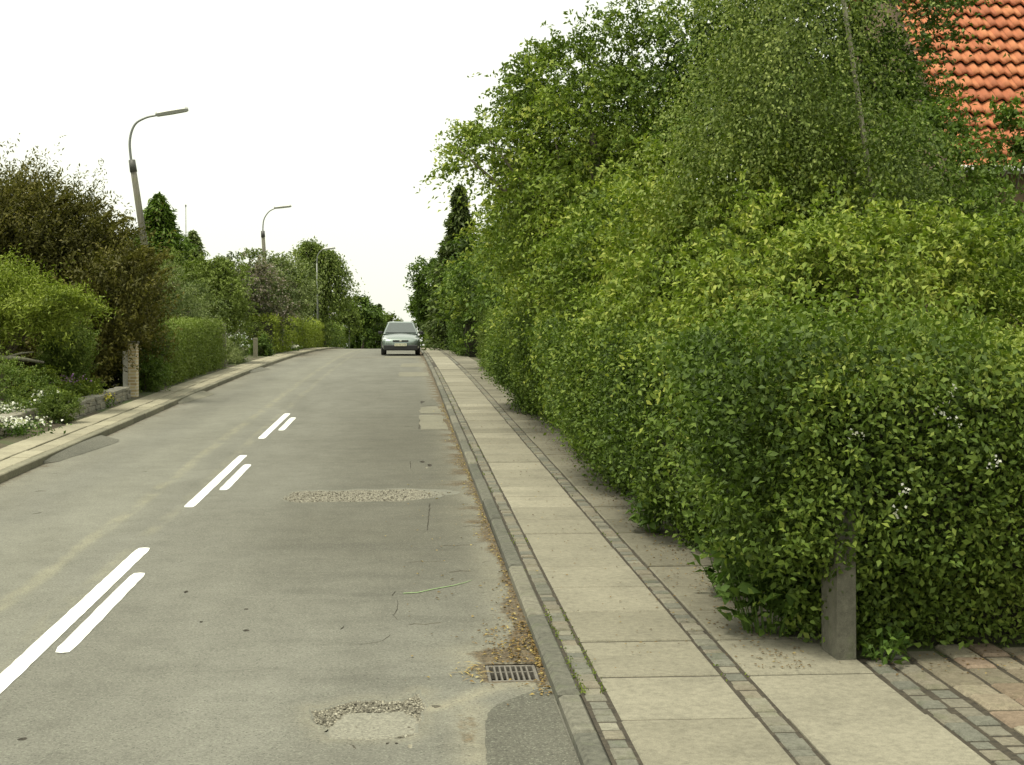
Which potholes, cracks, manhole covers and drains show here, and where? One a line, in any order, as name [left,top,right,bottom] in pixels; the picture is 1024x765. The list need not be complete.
pothole [309,690,428,740]
crack [367,592,441,644]
pothole [280,488,460,503]
drain grate [485,664,541,682]
